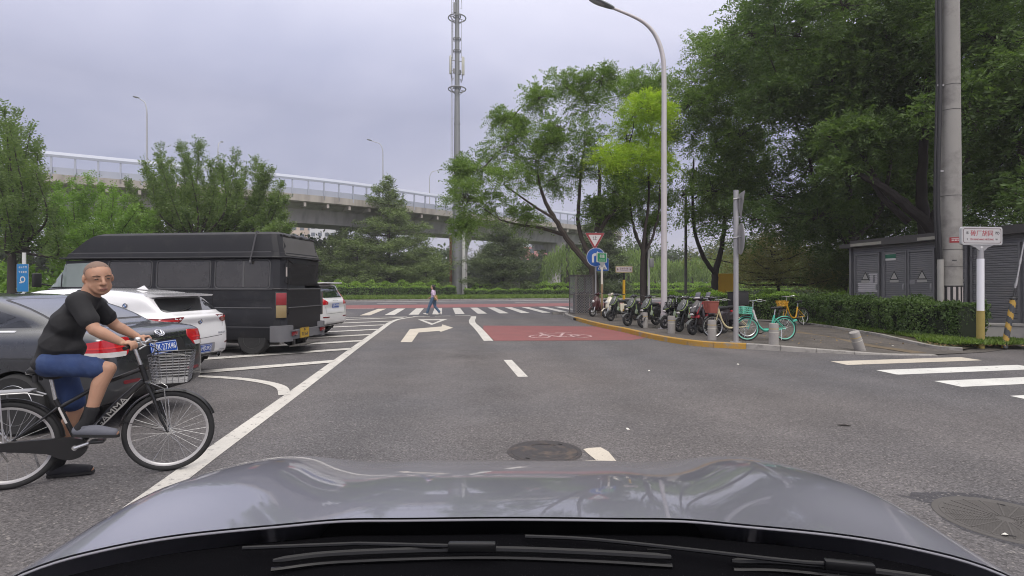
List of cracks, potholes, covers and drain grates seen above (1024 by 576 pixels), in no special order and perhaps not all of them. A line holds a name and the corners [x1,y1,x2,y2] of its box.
manhole cover [507,440,582,460]
manhole cover [931,496,1024,544]
